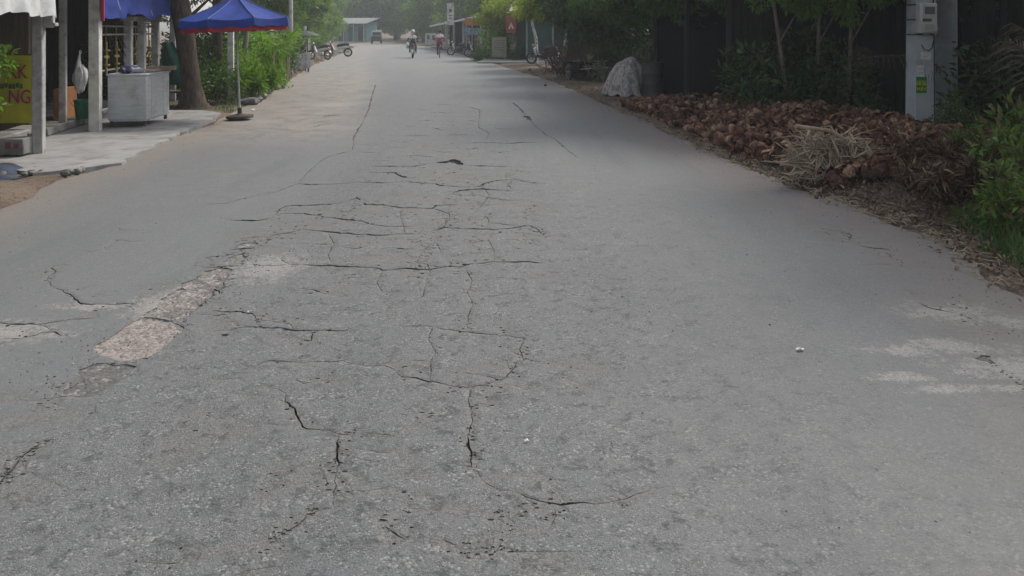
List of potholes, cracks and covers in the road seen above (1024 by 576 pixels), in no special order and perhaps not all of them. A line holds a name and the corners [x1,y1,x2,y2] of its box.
crack [0,440,50,485]
crack [3,265,153,339]
crack [173,103,650,560]
crack [825,229,903,266]
